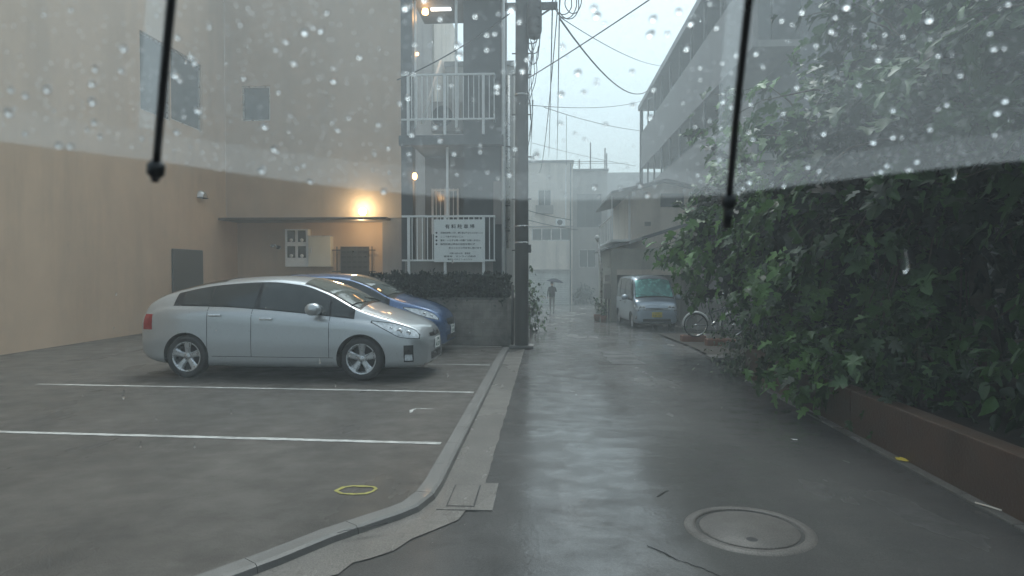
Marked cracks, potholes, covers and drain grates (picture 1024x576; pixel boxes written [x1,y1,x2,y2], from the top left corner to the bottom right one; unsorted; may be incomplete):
manhole cover [684,506,818,556]
crack [648,546,720,576]
